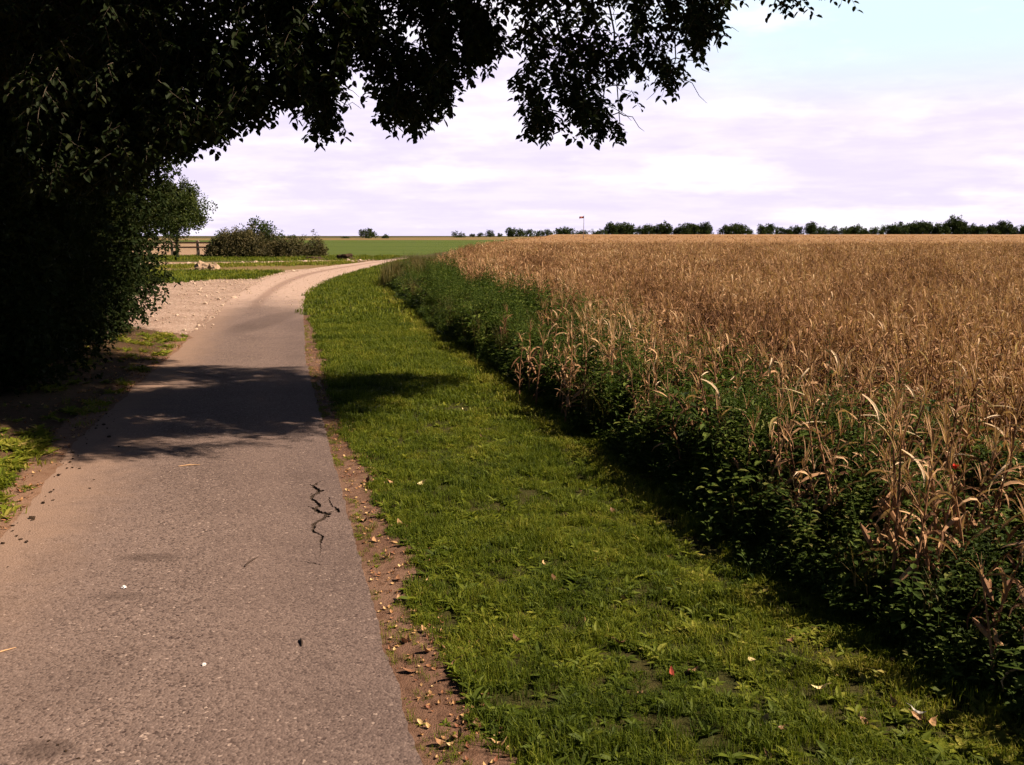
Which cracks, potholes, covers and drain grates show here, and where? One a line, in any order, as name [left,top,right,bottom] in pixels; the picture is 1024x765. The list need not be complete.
crack [304,480,340,565]
